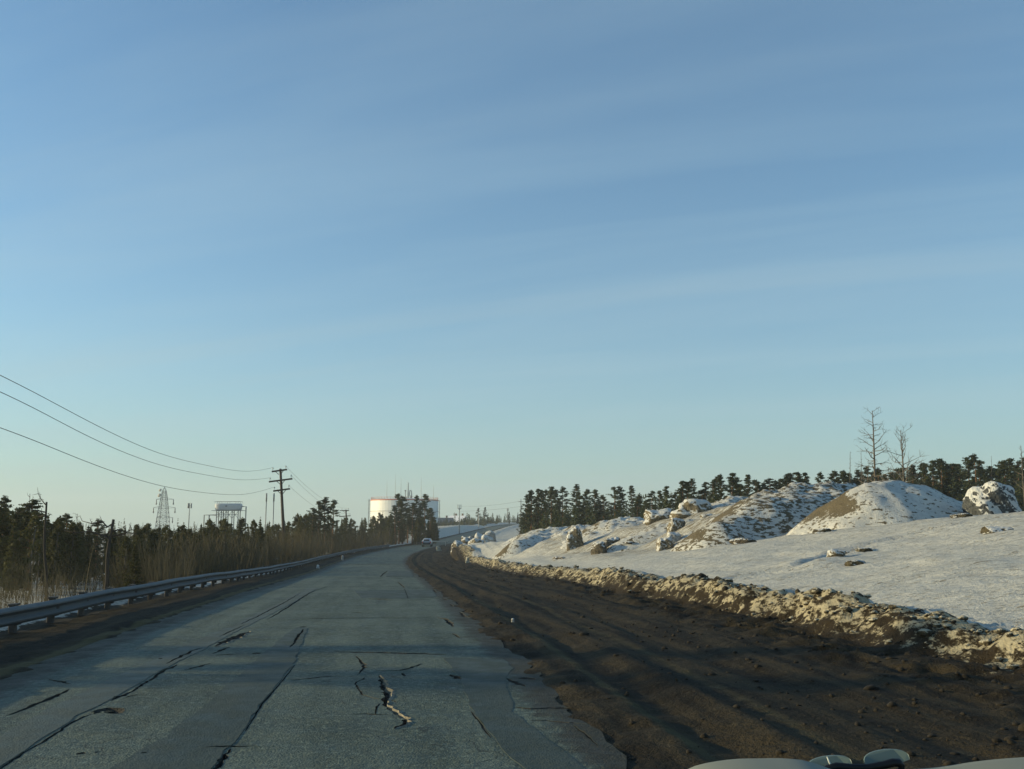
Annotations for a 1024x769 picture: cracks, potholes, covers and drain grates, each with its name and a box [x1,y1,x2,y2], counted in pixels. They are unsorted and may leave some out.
crack [0,679,91,769]
crack [111,587,325,701]
crack [355,656,421,715]
